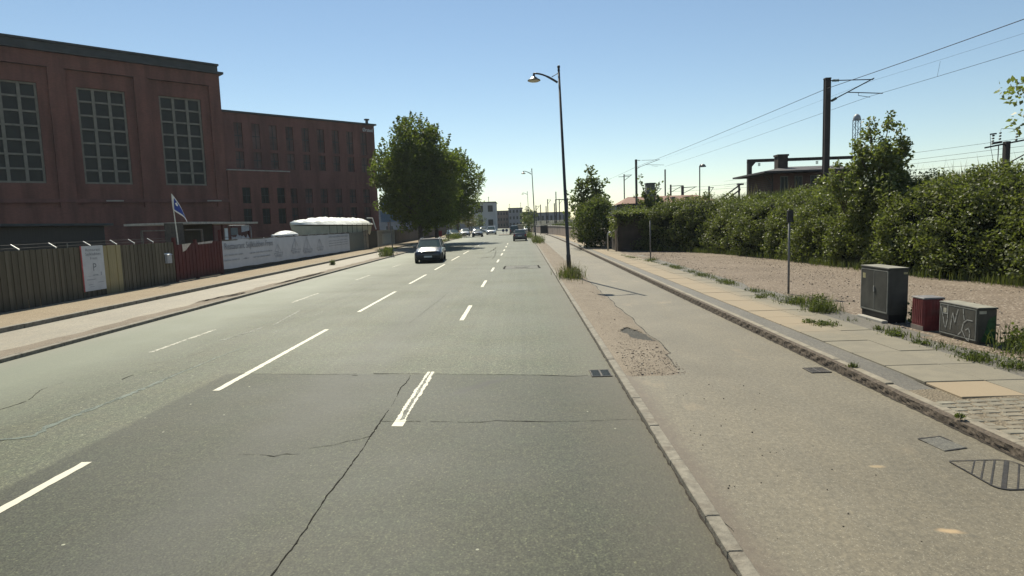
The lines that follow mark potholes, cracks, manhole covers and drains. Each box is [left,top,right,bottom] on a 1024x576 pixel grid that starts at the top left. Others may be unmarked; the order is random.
drain grate [589,369,613,377]
manhole cover [918,436,967,451]
pothole [619,326,658,342]
crack [259,379,409,576]
